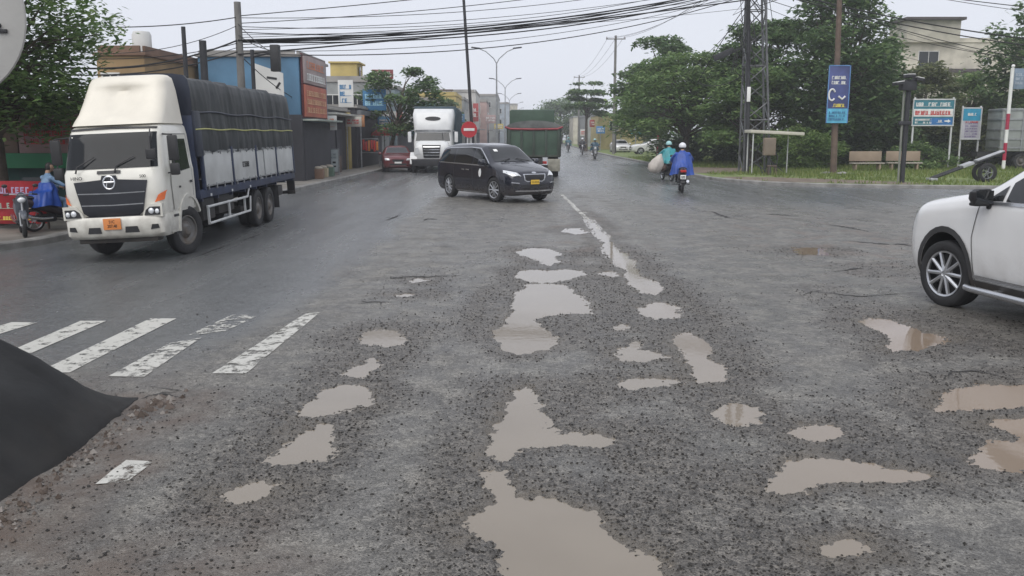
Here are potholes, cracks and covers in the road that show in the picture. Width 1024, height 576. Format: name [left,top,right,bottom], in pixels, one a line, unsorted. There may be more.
pothole [610,339,676,364]
pothole [212,477,283,507]
pothole [251,421,347,469]
pothole [705,400,770,428]
pothole [511,247,565,266]
pothole [290,382,378,418]
pothole [513,268,589,284]
pothole [667,331,737,385]
pothole [811,530,889,562]
pothole [783,420,857,443]
pothole [958,413,1024,474]
pothole [357,327,412,347]
